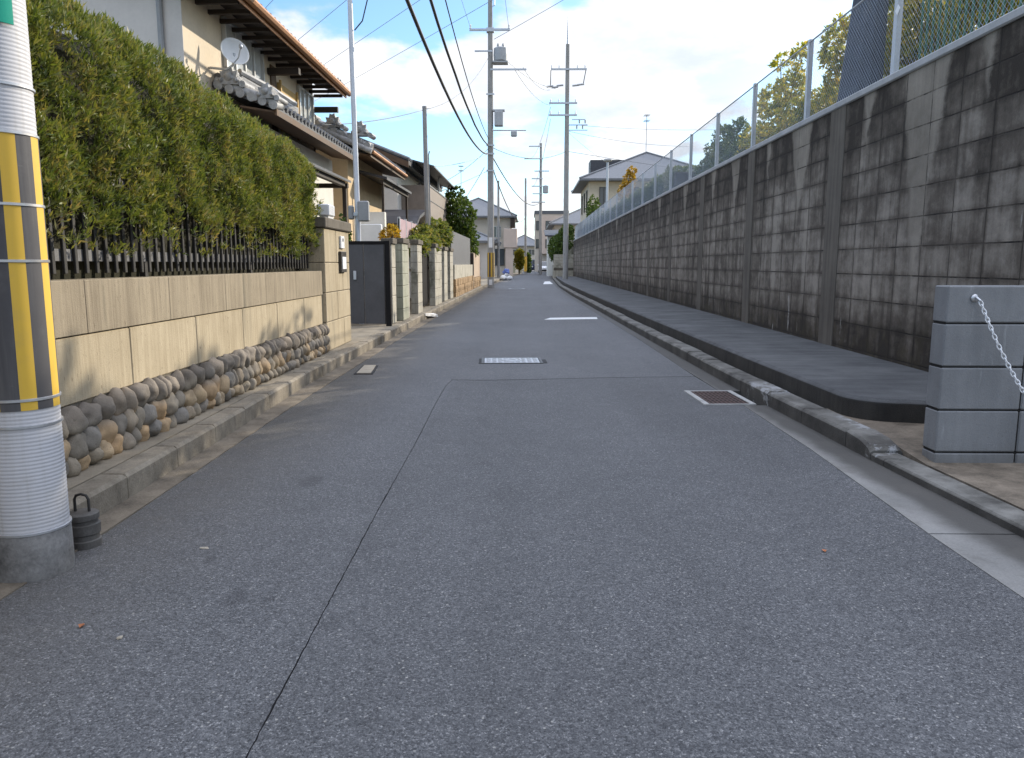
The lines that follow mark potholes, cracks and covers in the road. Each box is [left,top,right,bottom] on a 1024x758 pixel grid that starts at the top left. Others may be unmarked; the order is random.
drain grate [684,390,756,405]
